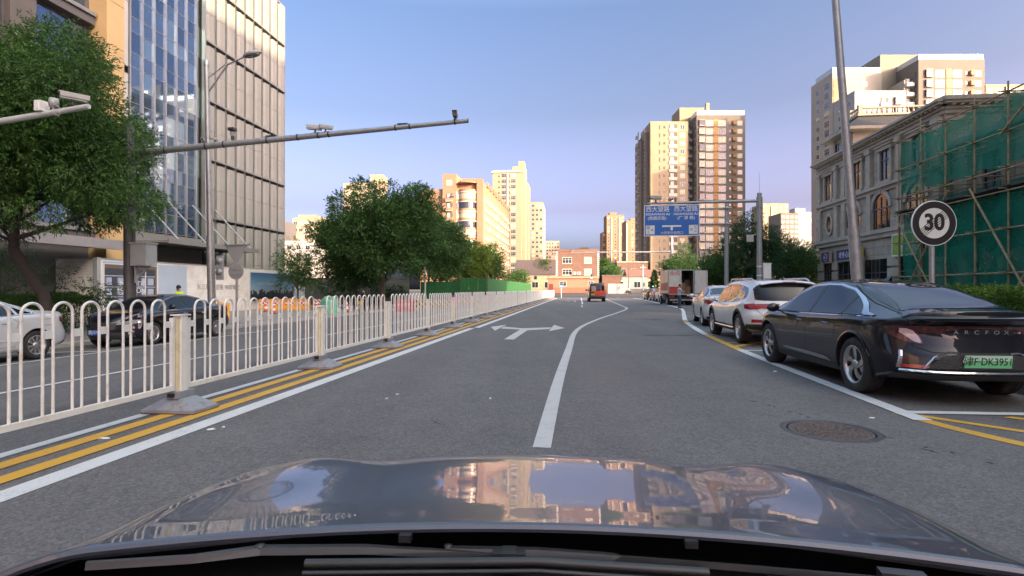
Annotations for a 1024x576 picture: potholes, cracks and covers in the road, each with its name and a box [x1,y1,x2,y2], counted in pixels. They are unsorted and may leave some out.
manhole cover [780,420,885,443]
